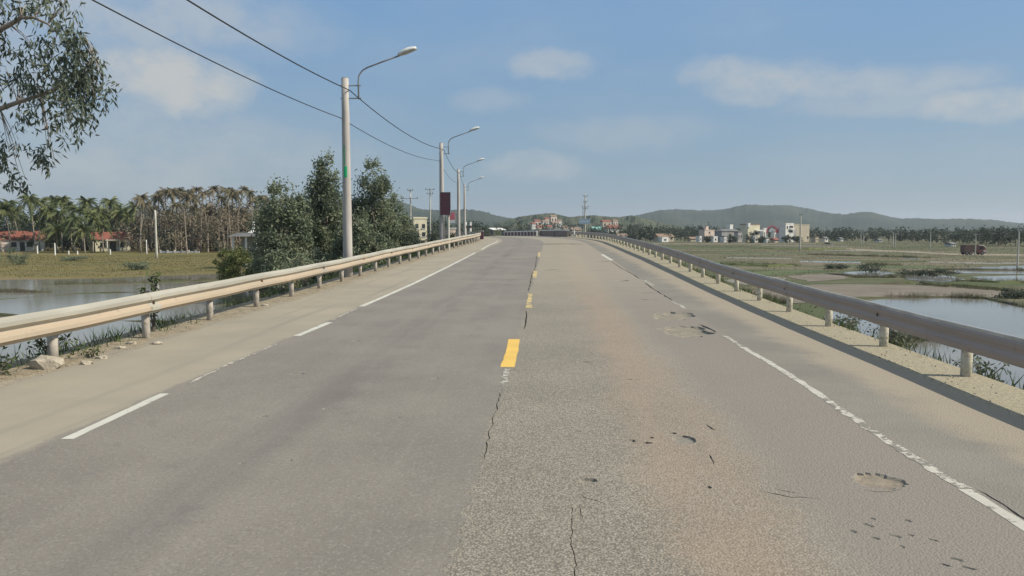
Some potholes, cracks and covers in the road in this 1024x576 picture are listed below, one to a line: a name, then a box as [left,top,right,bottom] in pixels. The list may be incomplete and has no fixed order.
pothole [672,435,696,444]
pothole [657,326,715,338]
pothole [851,472,910,490]
crack [570,494,602,576]
pothole [649,312,695,320]
crack [484,389,503,458]
